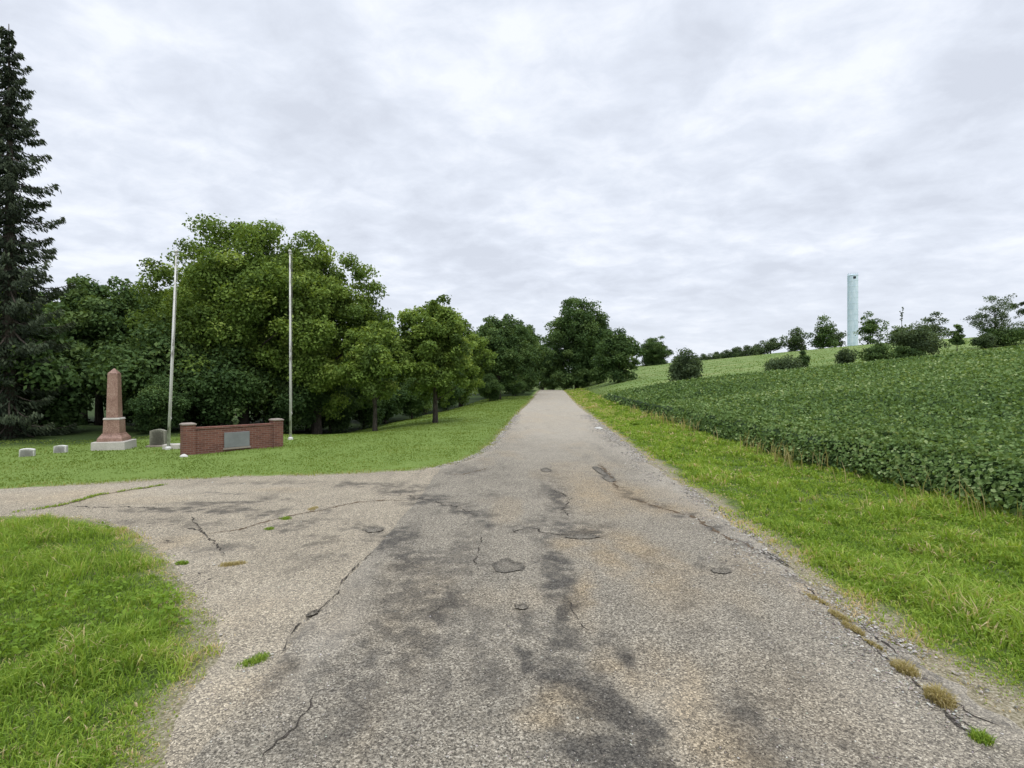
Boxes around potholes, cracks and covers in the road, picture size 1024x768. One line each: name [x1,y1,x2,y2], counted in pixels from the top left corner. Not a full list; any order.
crack [261,694,314,758]
crack [598,464,906,661]
crack [893,679,1000,734]
crack [37,485,167,510]
crack [166,493,477,556]
